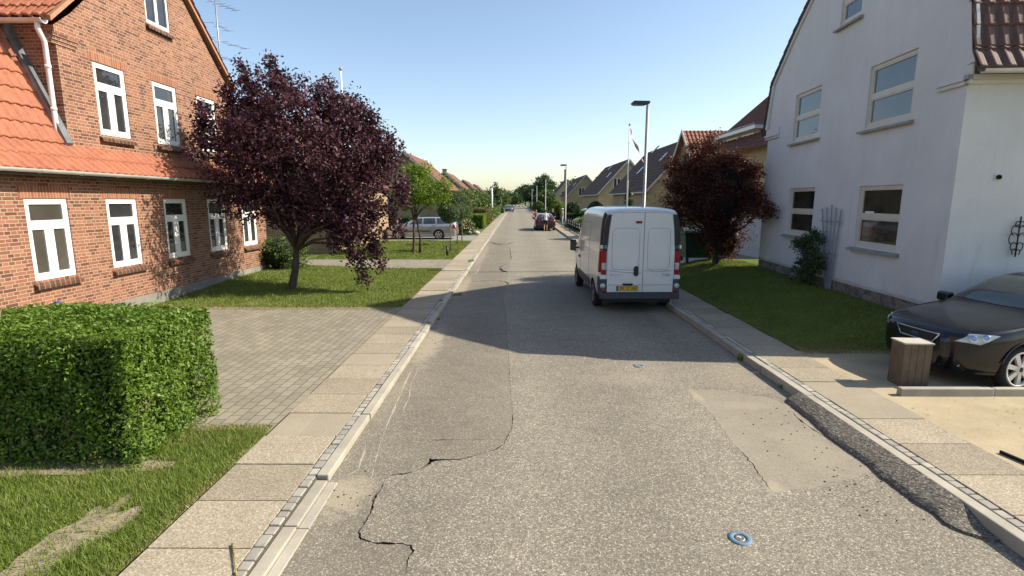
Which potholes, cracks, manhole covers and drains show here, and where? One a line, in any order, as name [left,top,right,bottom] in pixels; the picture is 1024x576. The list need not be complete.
manhole cover [728,531,753,546]
